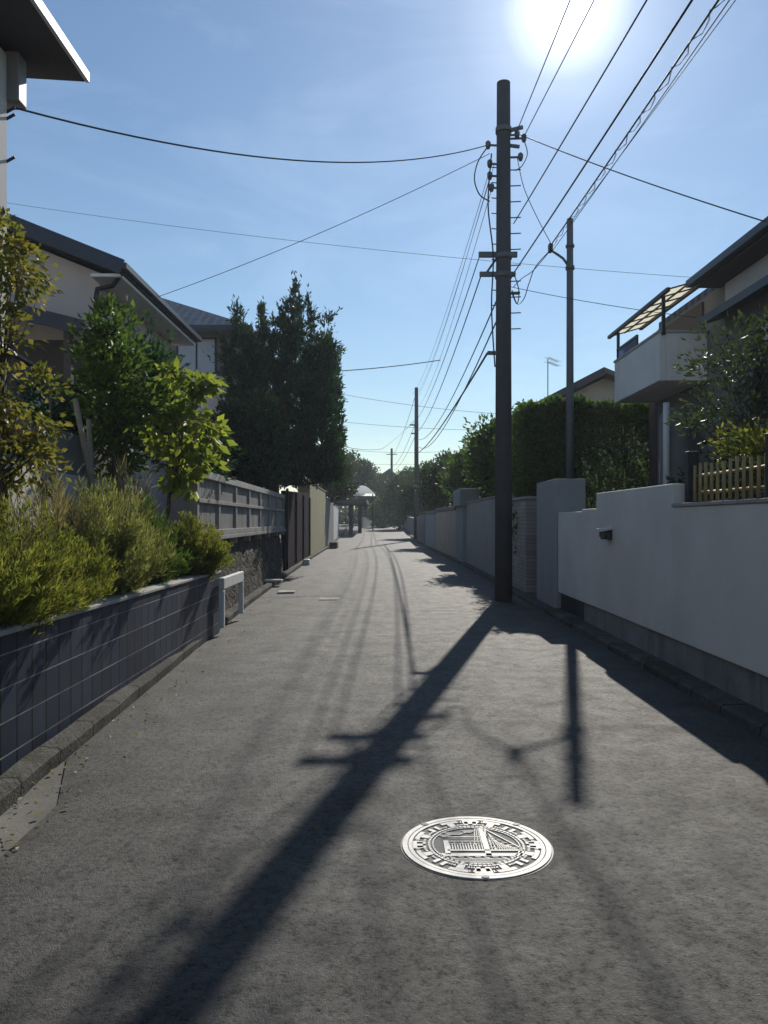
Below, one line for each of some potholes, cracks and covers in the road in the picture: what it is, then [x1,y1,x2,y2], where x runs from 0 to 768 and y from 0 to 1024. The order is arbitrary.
manhole cover [400,816,554,881]
